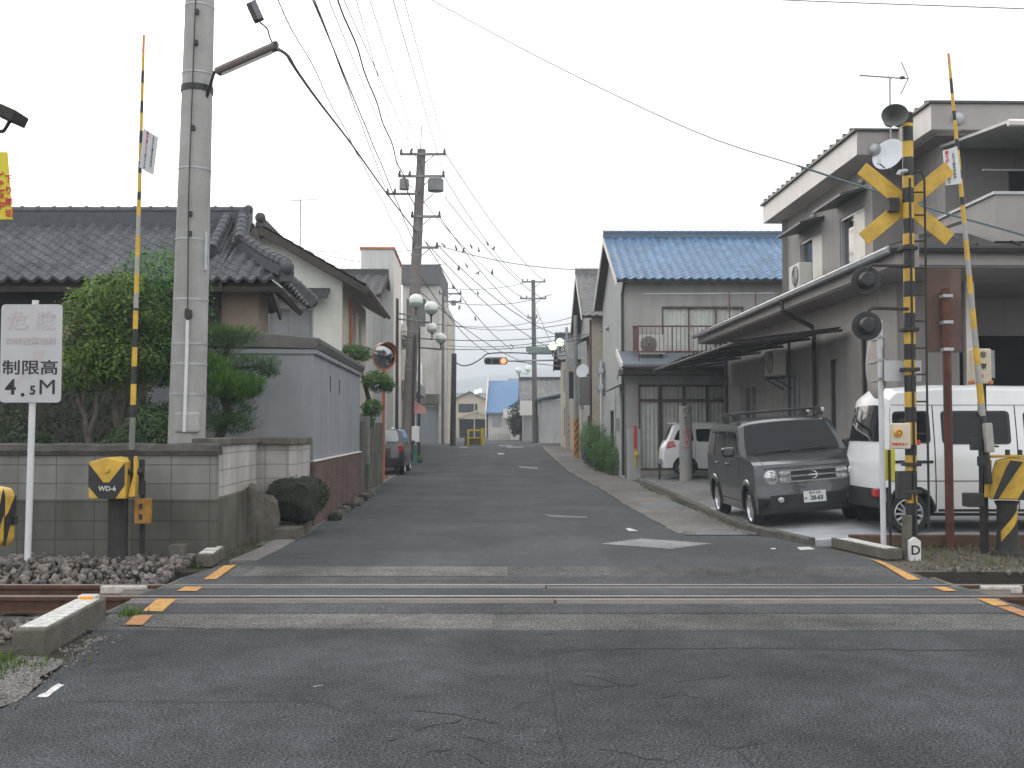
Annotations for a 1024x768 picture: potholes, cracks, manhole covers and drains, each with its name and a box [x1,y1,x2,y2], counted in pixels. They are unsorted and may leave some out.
crack [569,675,636,696]
crack [655,665,760,706]
